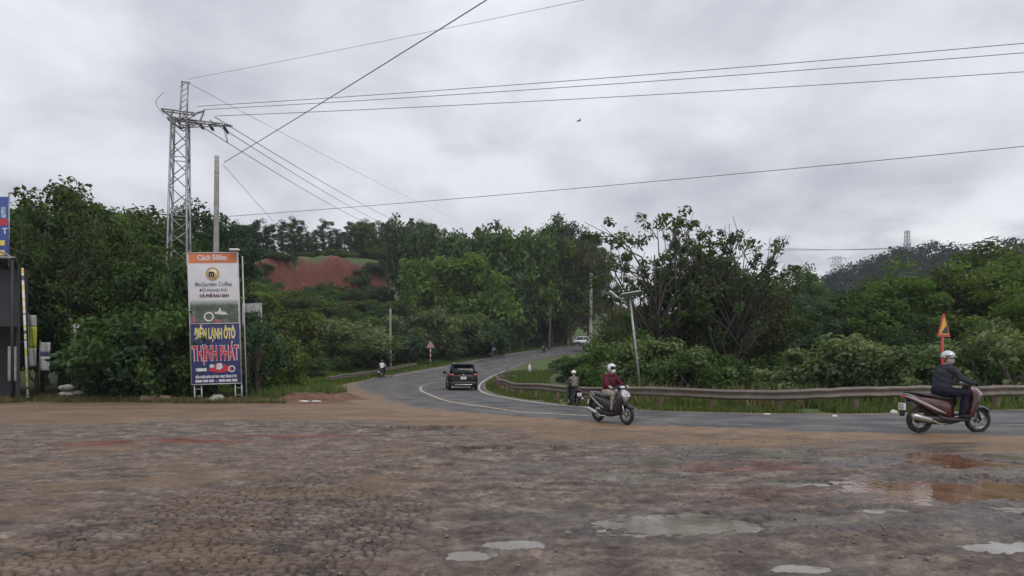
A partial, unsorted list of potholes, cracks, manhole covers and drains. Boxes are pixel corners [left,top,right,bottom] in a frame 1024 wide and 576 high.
pothole [945,536,1024,552]
pothole [845,504,914,514]
pothole [818,473,1024,509]
pothole [472,539,550,548]
pothole [554,508,788,538]
pothole [887,452,1024,469]
pothole [770,559,835,574]
